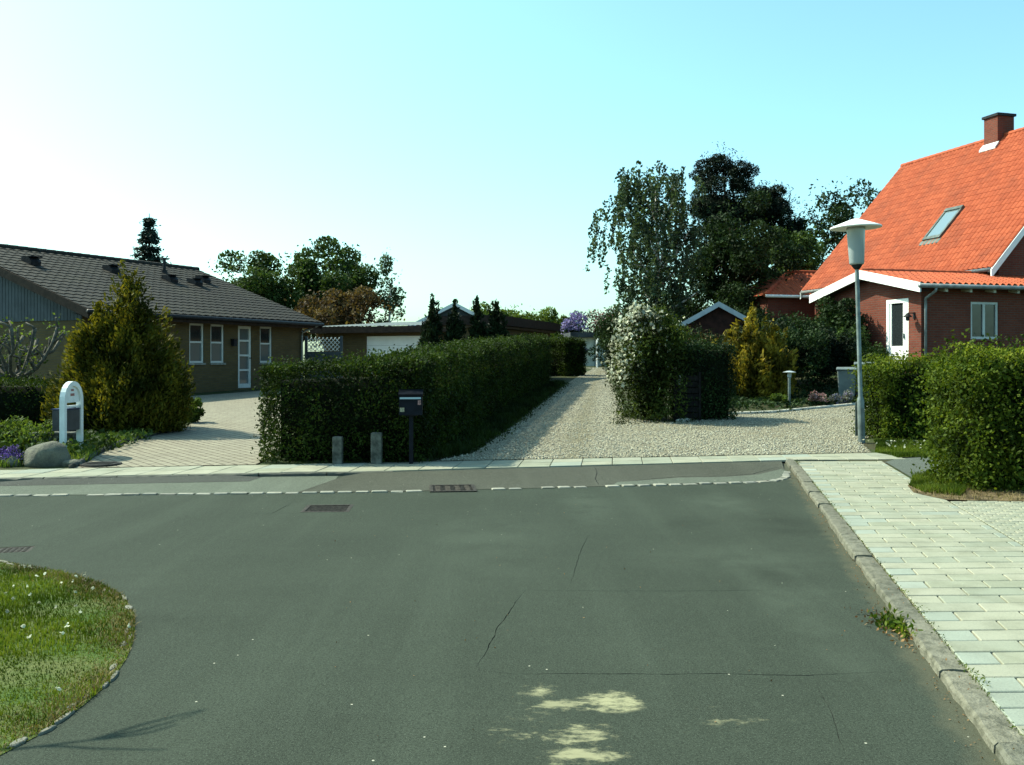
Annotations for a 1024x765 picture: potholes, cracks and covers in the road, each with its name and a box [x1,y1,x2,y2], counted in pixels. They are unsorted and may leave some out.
crack [595,468,769,484]
drain grate [301,504,354,512]
drain grate [429,484,477,493]
